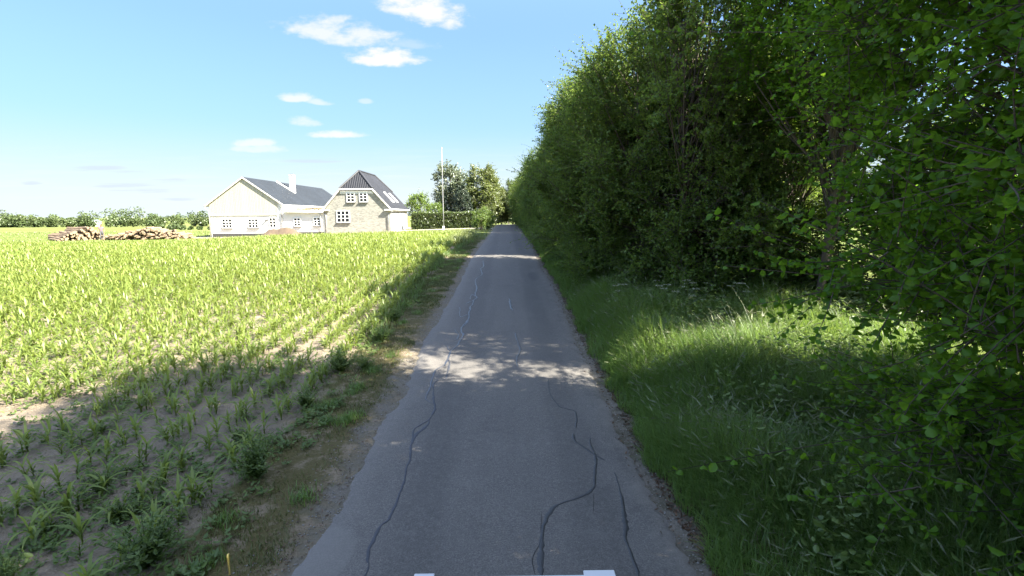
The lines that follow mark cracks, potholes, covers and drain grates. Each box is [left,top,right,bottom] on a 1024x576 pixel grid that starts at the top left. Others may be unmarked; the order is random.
crack [548,378,578,428]
